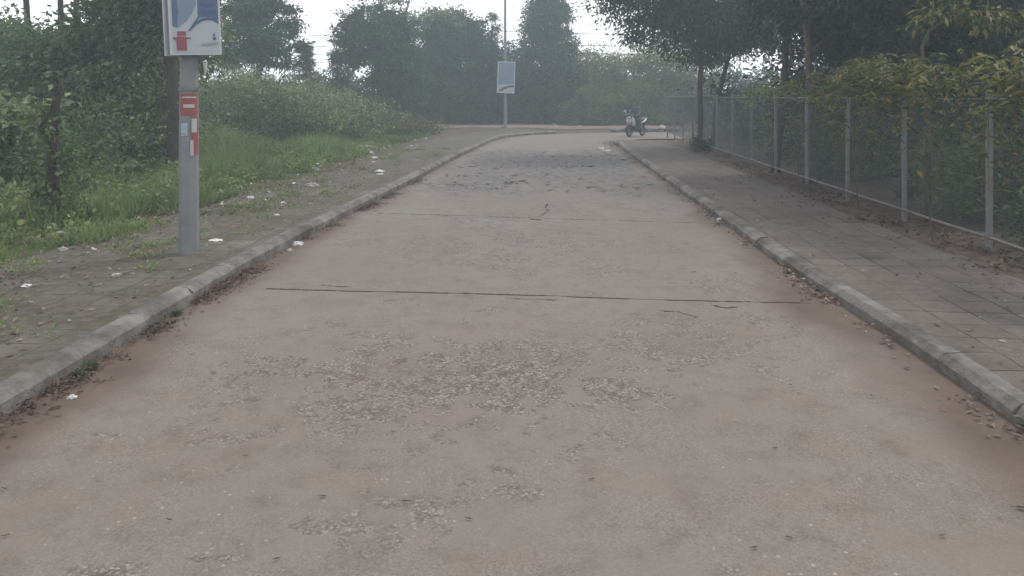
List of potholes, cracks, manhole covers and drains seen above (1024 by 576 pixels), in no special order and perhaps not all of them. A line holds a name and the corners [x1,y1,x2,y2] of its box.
crack [388,150,690,223]
